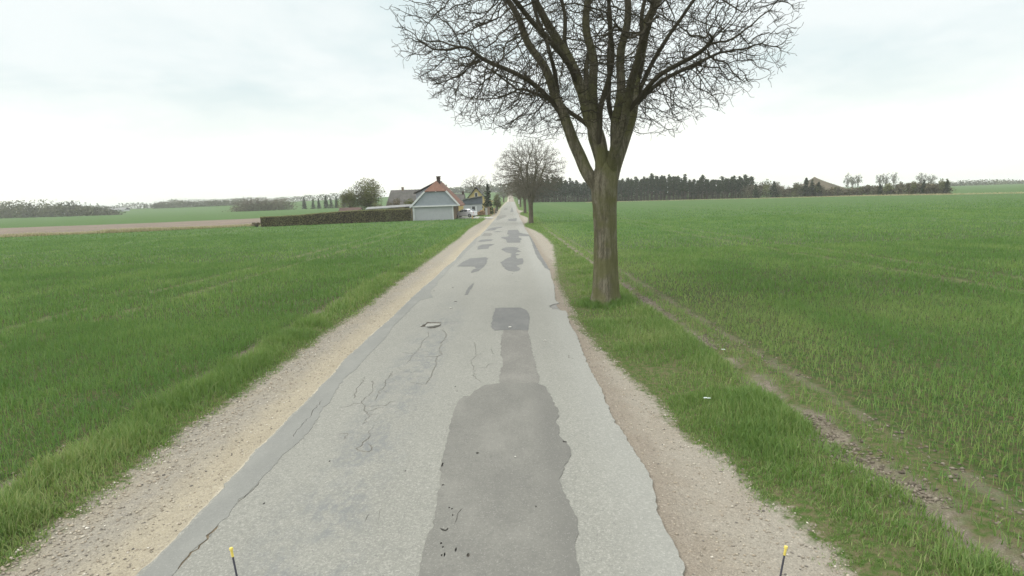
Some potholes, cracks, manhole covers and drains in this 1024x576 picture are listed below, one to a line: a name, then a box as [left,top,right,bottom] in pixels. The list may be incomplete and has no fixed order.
crack [339,331,447,452]
